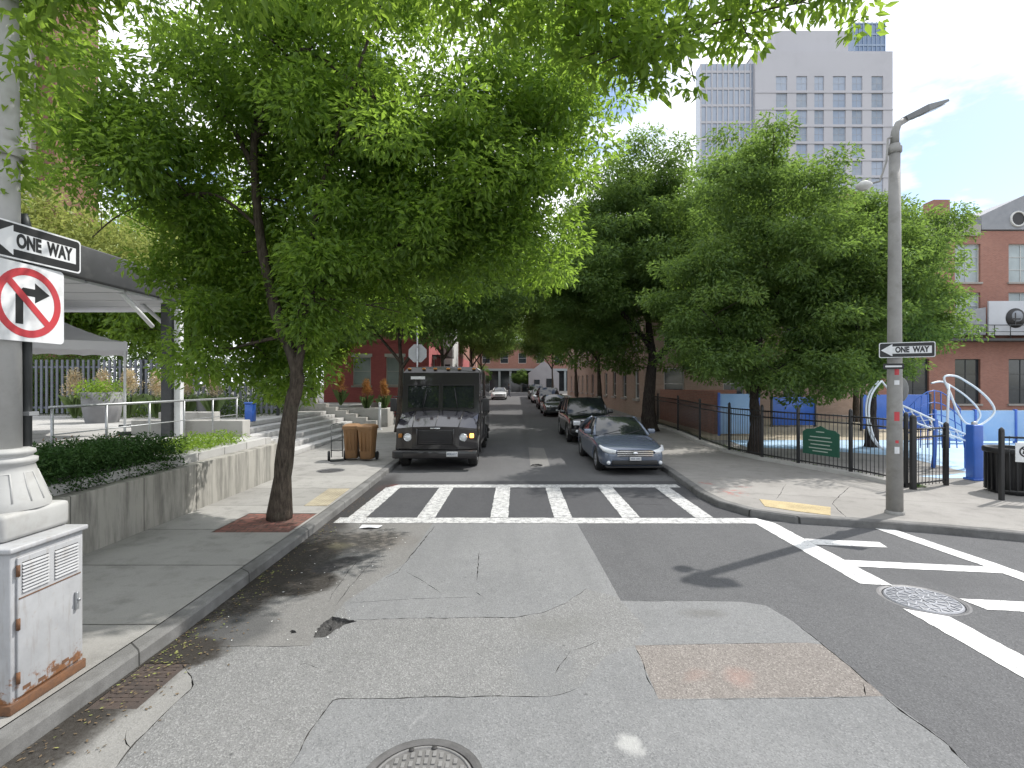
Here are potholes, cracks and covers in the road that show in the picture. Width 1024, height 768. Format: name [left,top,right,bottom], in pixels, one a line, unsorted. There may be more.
manhole cover [876,584,973,616]
crack [288,529,483,604]
drain grate [87,664,188,709]
manhole cover [367,739,482,768]
pothole [314,616,356,638]
crack [289,687,579,768]
